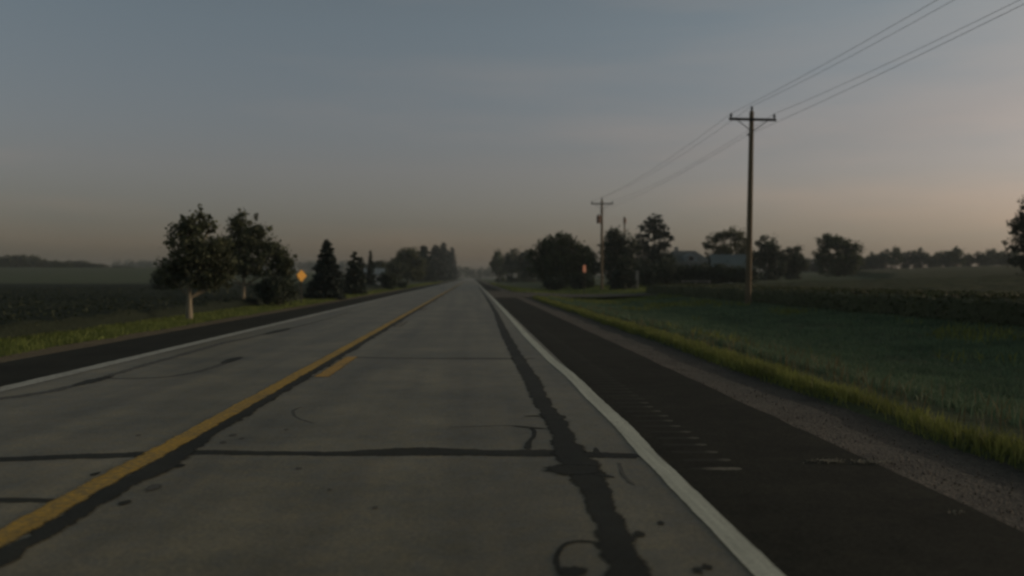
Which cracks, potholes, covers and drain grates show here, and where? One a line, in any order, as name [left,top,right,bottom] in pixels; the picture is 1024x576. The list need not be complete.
crack [0,287,652,576]
